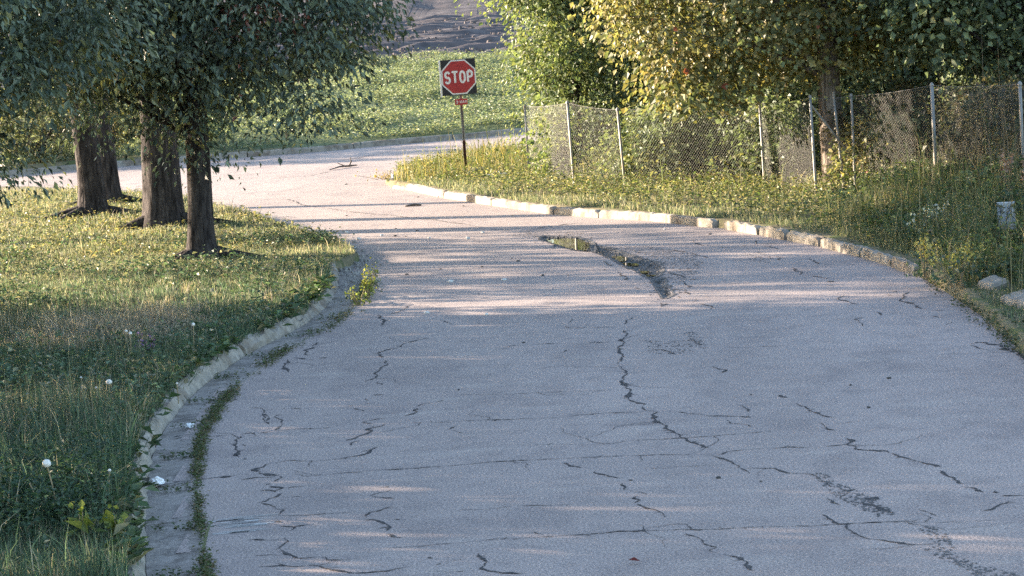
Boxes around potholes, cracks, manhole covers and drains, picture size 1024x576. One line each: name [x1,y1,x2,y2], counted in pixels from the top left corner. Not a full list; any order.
pothole [535,234,602,253]
crack [155,305,1015,574]
pothole [588,244,668,281]
pothole [644,276,683,300]
